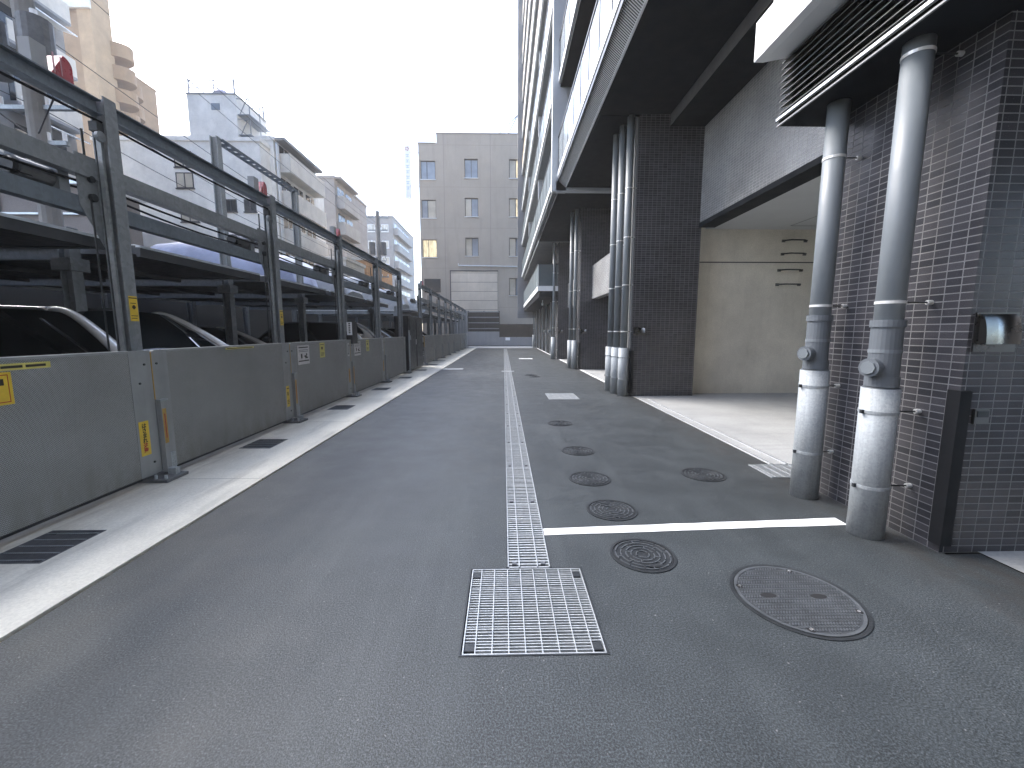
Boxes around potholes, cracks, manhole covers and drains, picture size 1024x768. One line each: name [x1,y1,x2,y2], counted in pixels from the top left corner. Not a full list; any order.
drain grate [458,567,610,657]
drain grate [506,443,530,467]
manhole cover [681,467,726,482]
manhole cover [562,446,595,456]
drain grate [507,503,550,568]
manhole cover [729,564,874,641]
drain grate [0,530,106,564]
drain grate [748,464,792,478]
drain grate [239,439,288,449]
drain grate [505,426,526,444]
drain grate [505,414,522,427]
manhole cover [610,538,677,573]
